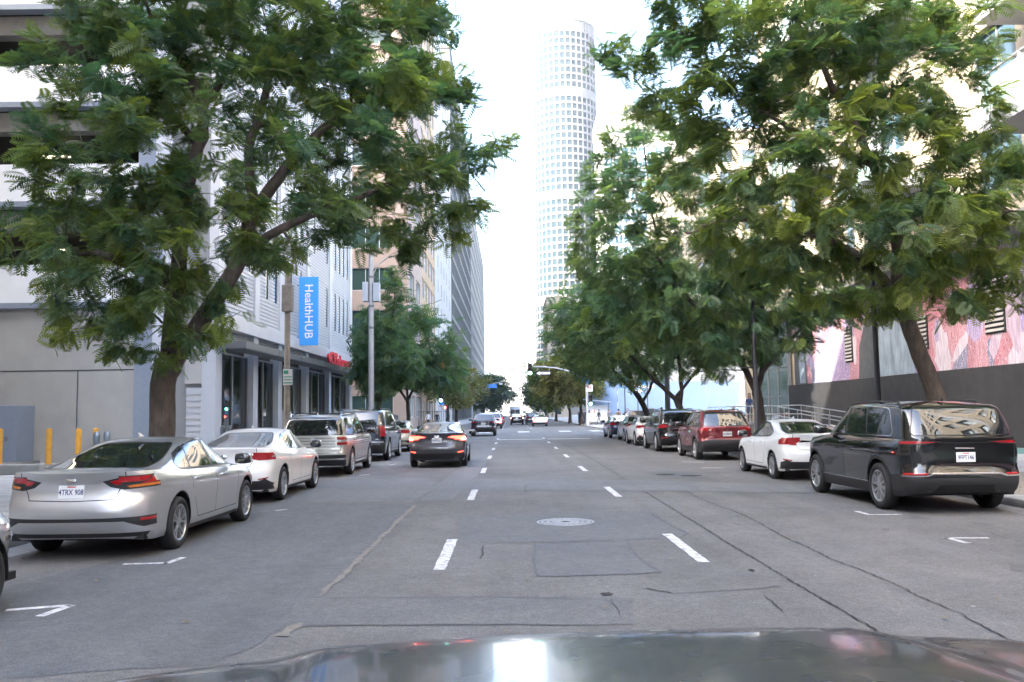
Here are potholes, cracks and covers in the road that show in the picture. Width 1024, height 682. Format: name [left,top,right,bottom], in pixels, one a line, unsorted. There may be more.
manhole cover [537,518,594,526]
crack [644,489,1015,641]
